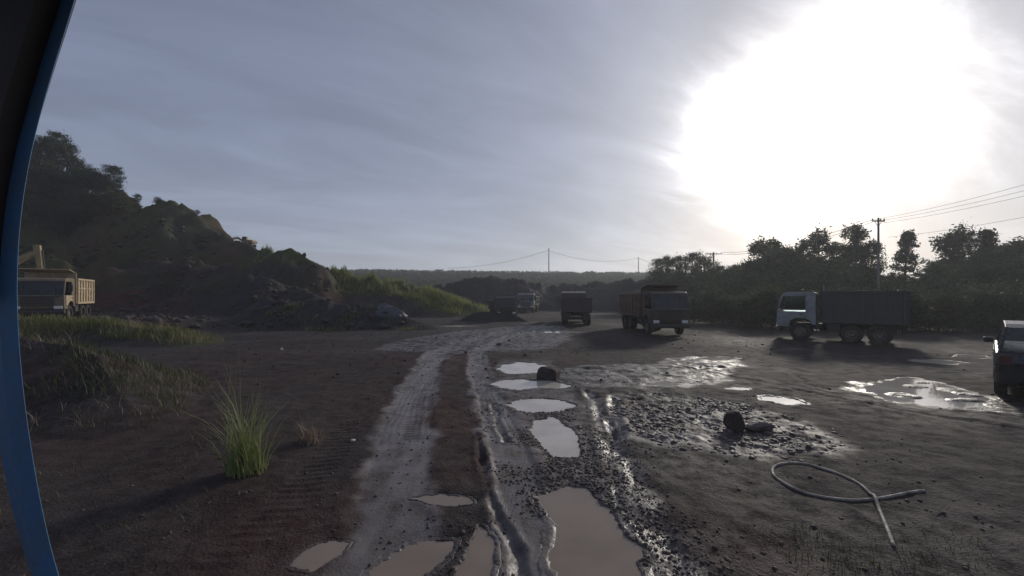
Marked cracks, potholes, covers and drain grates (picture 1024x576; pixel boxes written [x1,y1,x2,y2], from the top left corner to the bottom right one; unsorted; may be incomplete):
pothole [491,361,563,376]
pothole [530,479,662,576]
pothole [522,415,587,460]
pothole [484,377,578,392]
pothole [755,395,811,406]
pothole [362,536,462,576]
pothole [407,493,477,508]
pothole [855,377,1002,410]
pothole [285,539,354,575]
pothole [449,522,502,576]
pothole [499,396,585,415]
